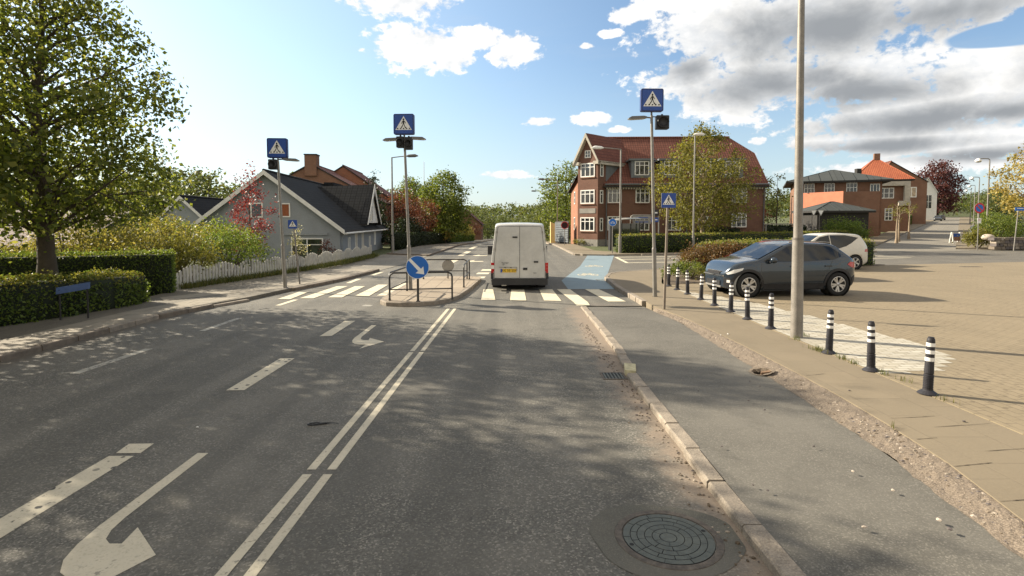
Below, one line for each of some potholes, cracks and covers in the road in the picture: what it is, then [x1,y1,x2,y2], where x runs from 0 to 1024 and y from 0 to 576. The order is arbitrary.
drain grate [599,372,628,380]
manhole cover [589,505,746,576]
